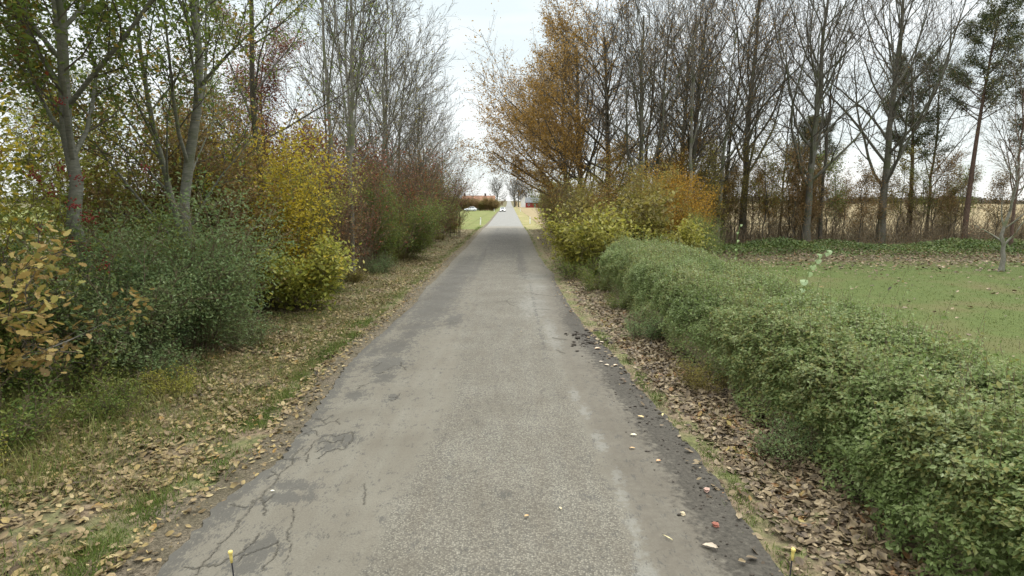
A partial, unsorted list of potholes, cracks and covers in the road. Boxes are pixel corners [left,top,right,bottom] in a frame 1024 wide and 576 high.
crack [188,415,353,575]
